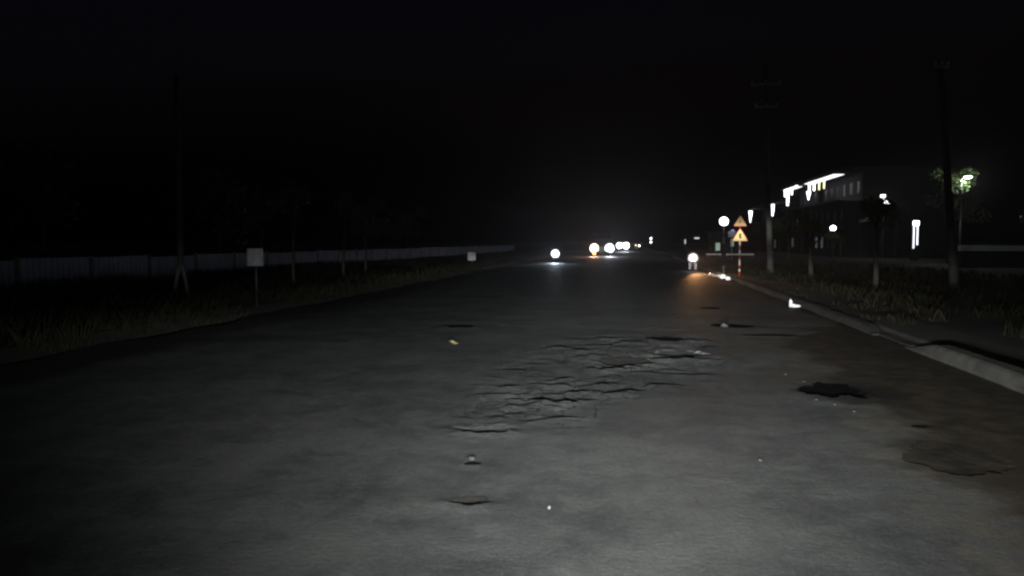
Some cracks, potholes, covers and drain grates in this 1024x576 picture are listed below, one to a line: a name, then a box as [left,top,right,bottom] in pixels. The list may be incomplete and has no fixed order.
pothole [796,382,869,399]
crack [432,324,753,448]
pothole [446,495,492,505]
